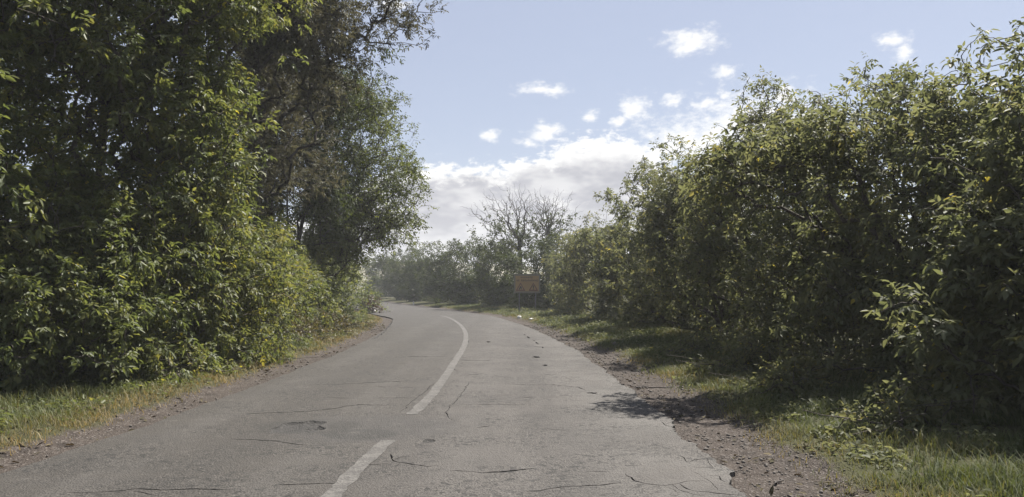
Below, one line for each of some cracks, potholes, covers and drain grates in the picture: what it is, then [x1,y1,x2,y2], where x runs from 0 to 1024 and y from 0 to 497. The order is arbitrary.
crack [370,454,534,473]
pothole [270,421,327,434]
crack [539,450,733,495]
crack [322,360,506,419]
